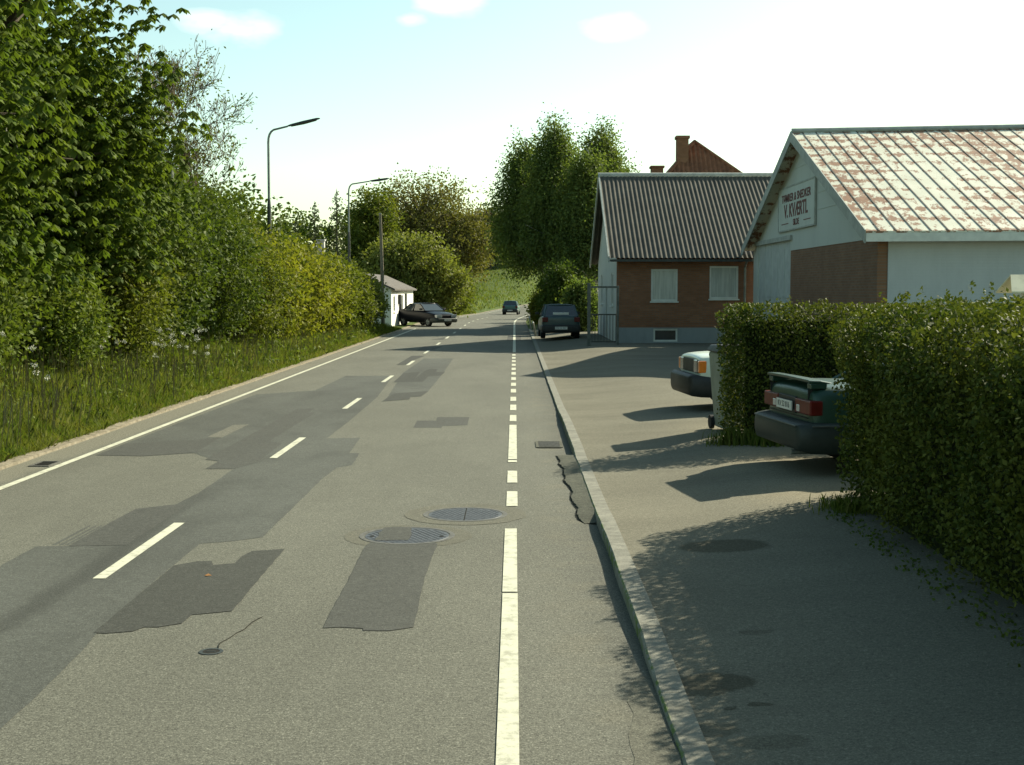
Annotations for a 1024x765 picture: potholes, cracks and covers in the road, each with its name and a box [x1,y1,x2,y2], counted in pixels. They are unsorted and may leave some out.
manhole cover [359,527,455,544]
manhole cover [423,507,507,522]
